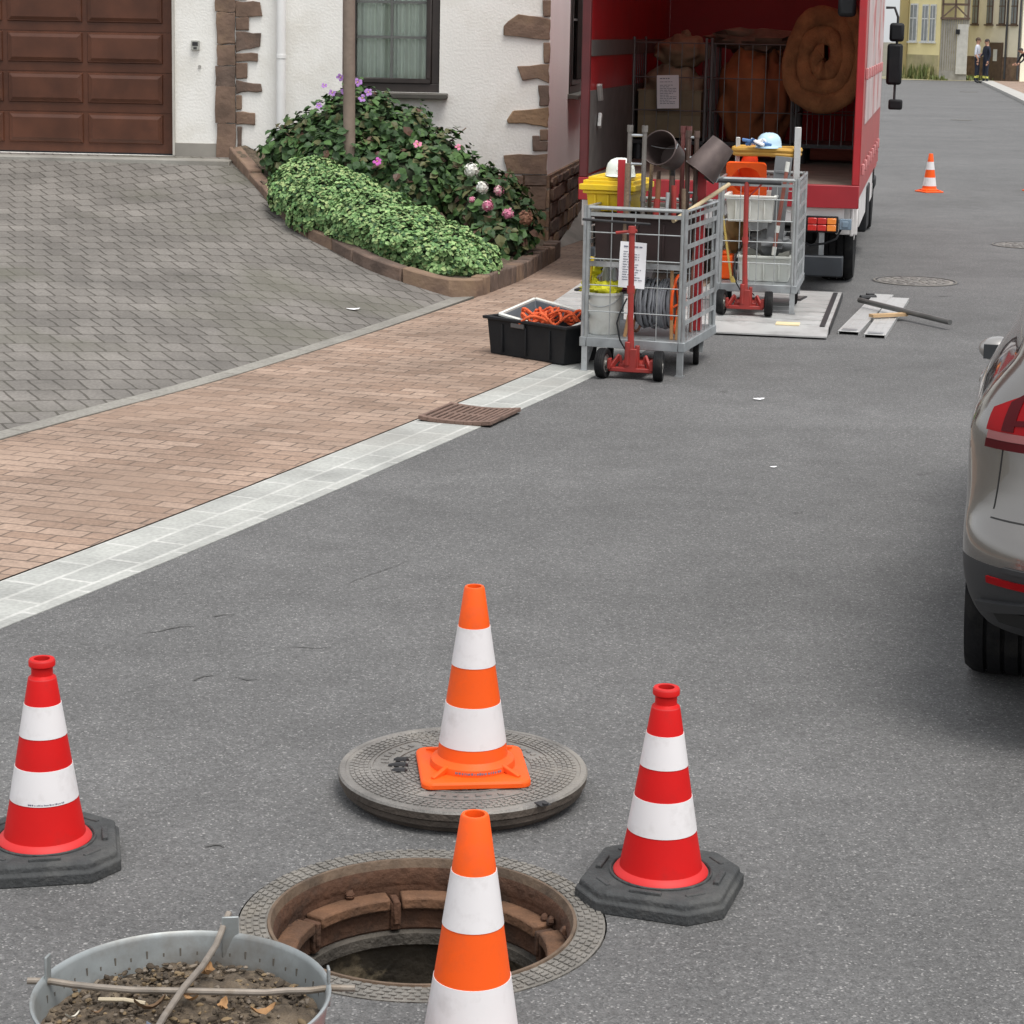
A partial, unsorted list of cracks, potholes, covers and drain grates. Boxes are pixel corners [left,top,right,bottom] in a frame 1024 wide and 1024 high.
drain grate [418,402,521,428]
manhole cover [871,276,959,287]
manhole cover [239,849,605,1003]
manhole cover [338,727,588,832]
